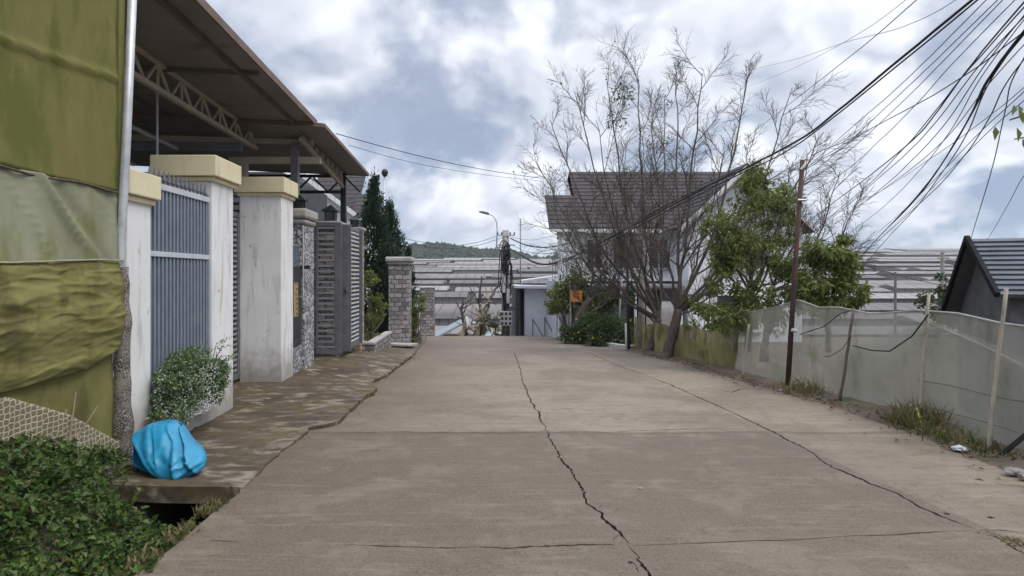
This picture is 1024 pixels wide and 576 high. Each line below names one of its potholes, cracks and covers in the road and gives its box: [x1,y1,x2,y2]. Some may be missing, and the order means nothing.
crack [226,352,1024,576]
